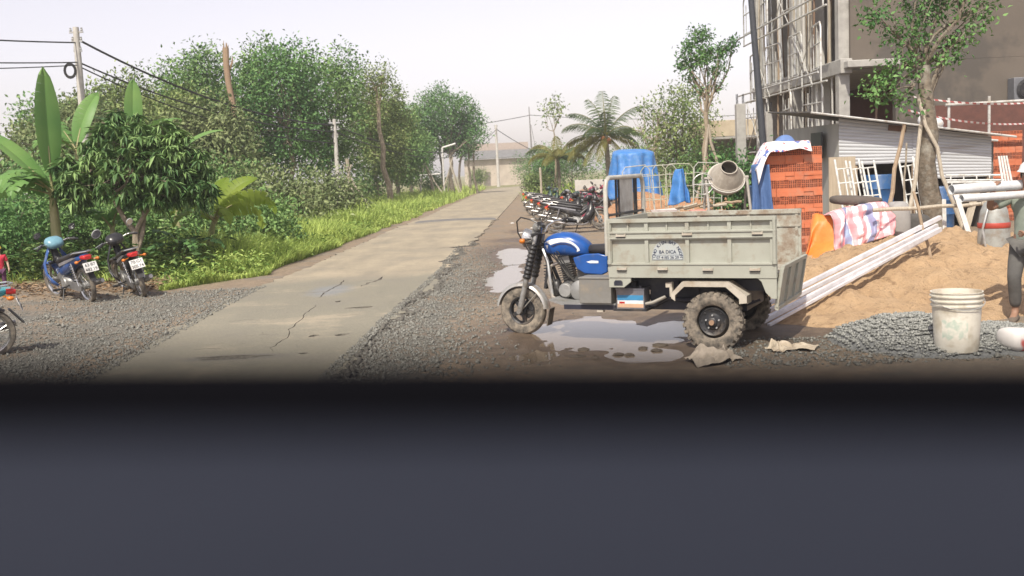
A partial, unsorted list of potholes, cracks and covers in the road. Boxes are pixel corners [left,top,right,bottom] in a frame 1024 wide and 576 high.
crack [263,280,344,351]
